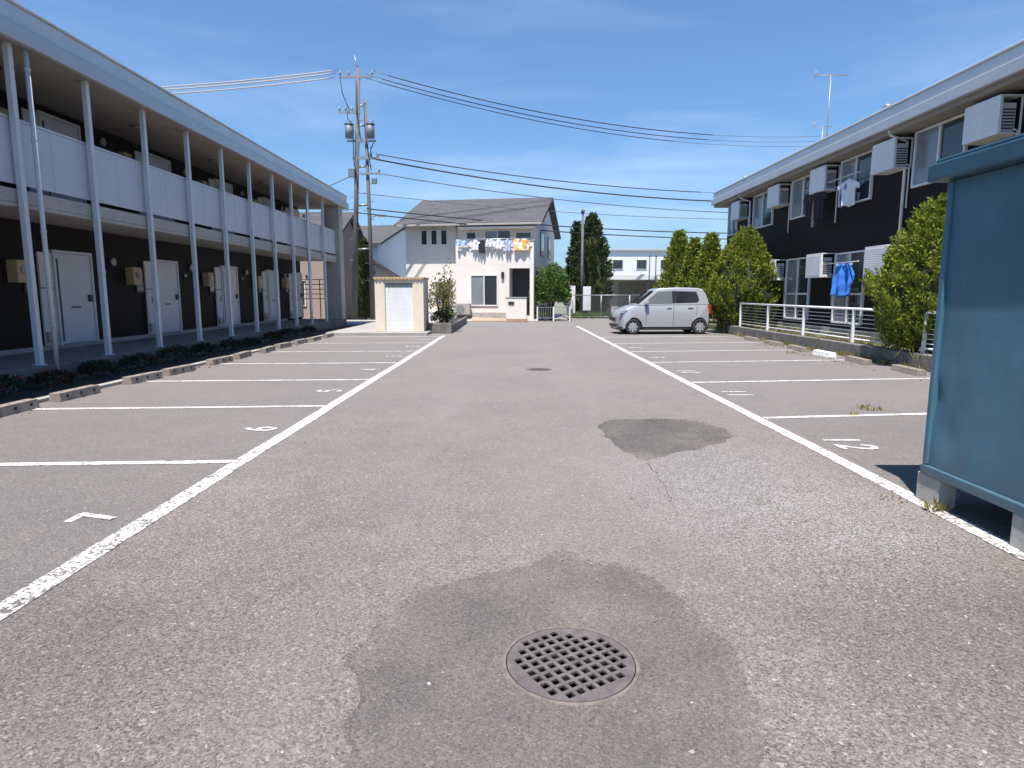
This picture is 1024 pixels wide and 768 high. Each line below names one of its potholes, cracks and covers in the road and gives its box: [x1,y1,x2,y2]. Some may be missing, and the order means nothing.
drain grate [502,626,640,706]
